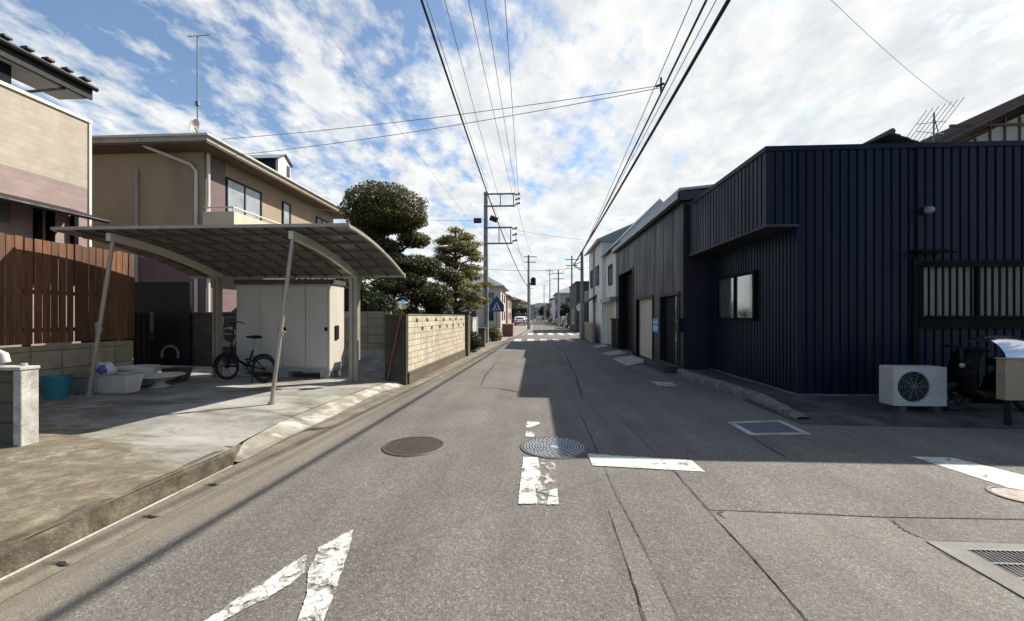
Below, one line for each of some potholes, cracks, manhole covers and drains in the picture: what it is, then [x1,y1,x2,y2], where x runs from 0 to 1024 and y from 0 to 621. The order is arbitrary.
crack [535,343,583,397]
manhole cover [520,436,589,459]
drain grate [926,541,1024,599]
crack [610,514,645,621]
manhole cover [381,436,445,457]
manhole cover [984,486,1024,503]
